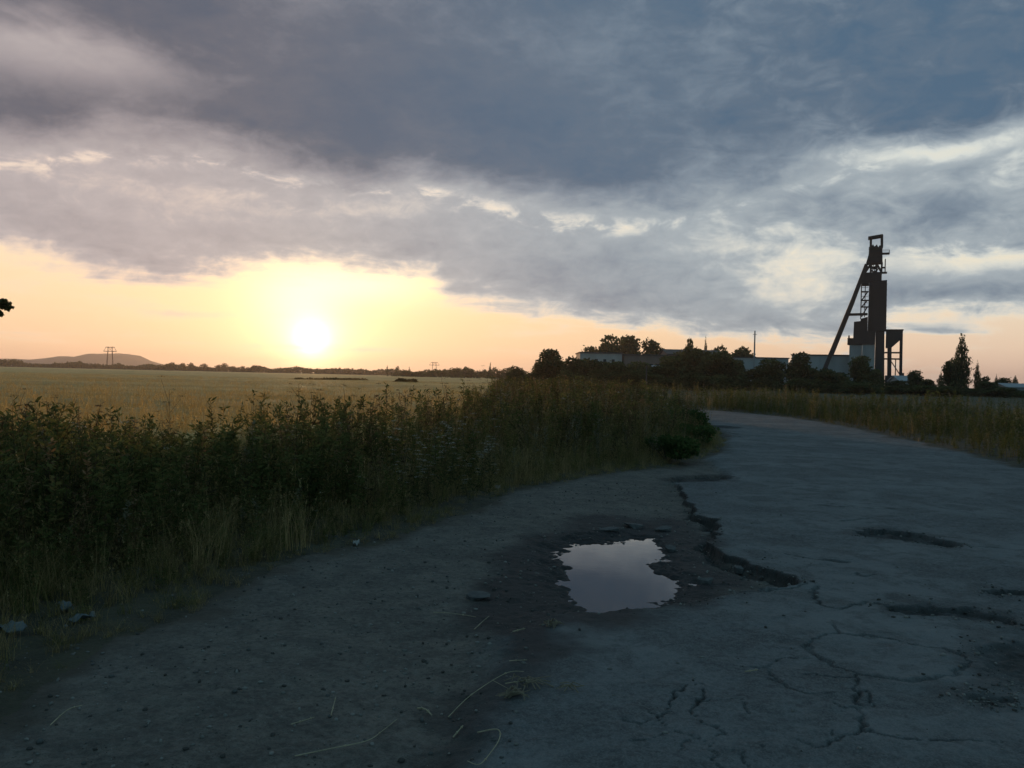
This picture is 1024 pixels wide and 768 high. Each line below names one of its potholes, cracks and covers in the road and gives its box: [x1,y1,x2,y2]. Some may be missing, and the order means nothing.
pothole [854,528,964,548]
crack [625,584,1020,768]
pothole [985,588,1024,596]
pothole [680,491,803,588]
pothole [883,604,1018,626]
pothole [526,522,730,614]
pothole [661,475,734,483]
